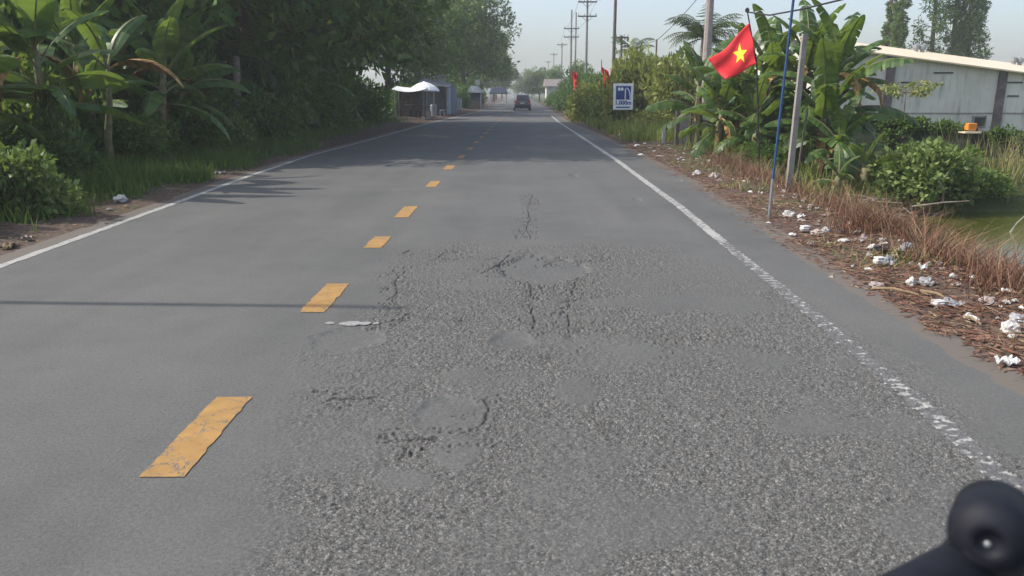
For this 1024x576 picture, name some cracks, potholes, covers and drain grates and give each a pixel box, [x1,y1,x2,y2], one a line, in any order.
crack [374,195,600,334]
